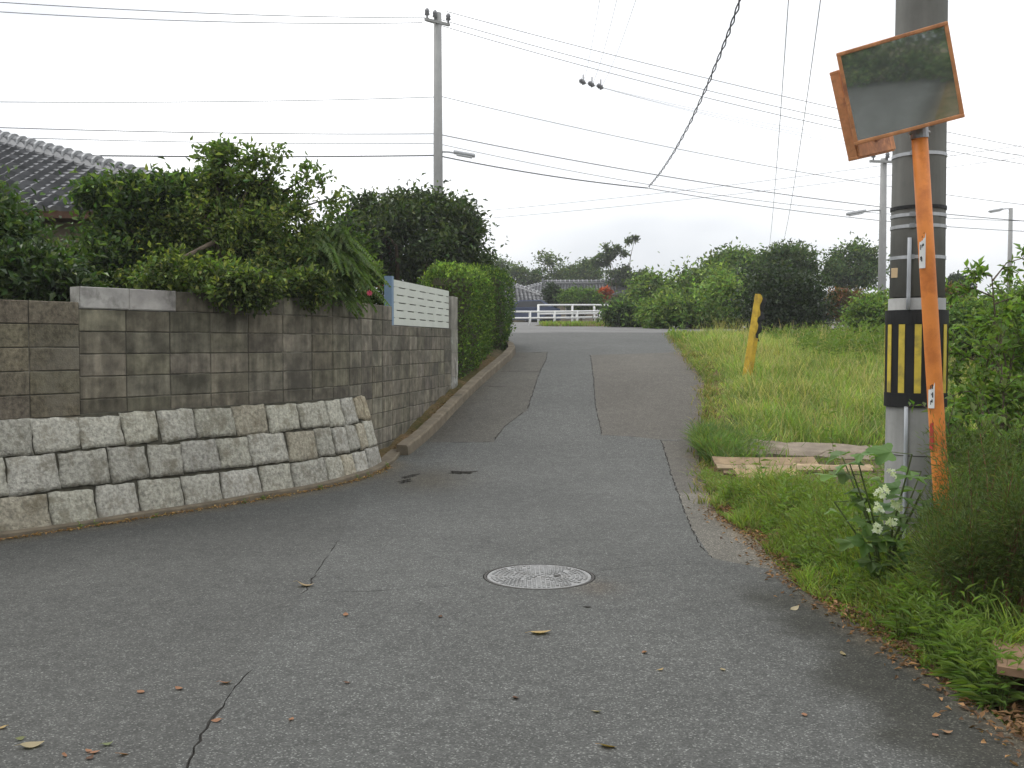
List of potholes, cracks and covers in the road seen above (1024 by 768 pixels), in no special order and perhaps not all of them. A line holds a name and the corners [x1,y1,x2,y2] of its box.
crack [303,542,475,593]
manhole cover [483,564,596,590]
crack [186,669,253,768]
